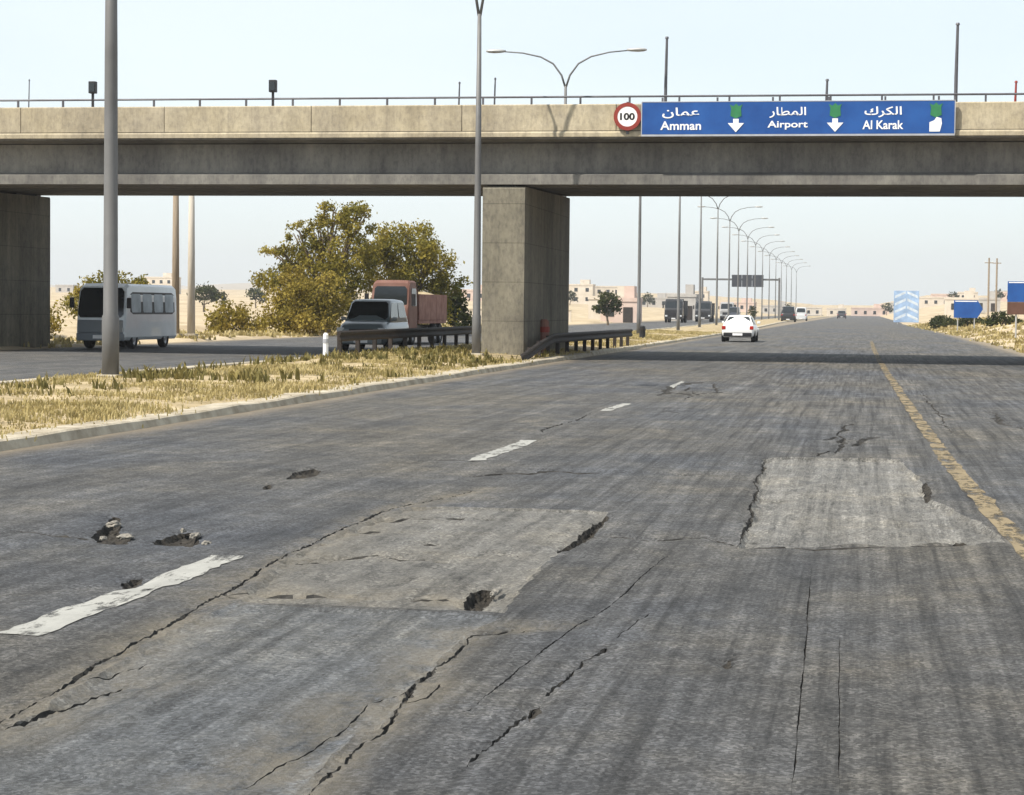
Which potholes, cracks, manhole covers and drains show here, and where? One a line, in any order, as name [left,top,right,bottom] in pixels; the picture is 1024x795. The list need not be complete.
crack [816,424,880,456]
pothole [557,516,610,553]
pothole [91,517,135,545]
pothole [463,588,503,611]
pothole [152,528,212,547]
crack [0,490,518,730]
pothole [922,482,932,503]
crack [657,382,733,413]
pothole [286,469,321,480]
crack [246,458,951,795]
